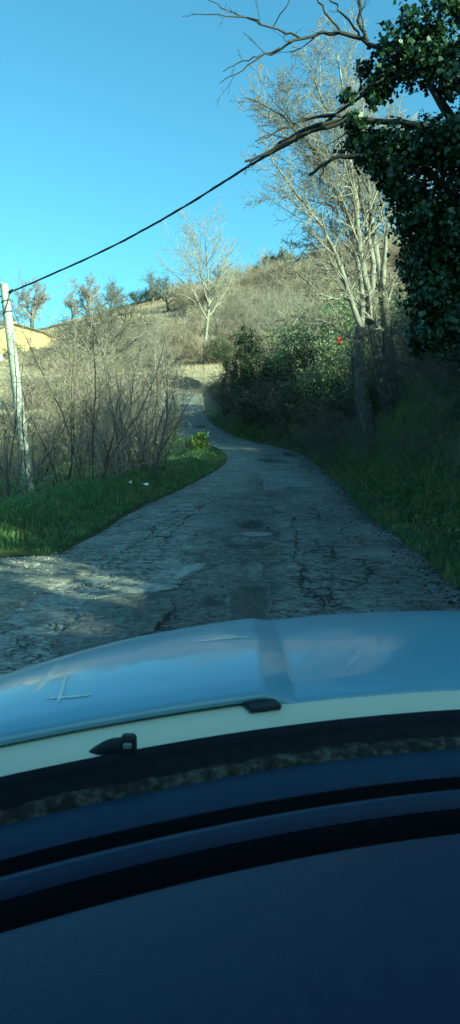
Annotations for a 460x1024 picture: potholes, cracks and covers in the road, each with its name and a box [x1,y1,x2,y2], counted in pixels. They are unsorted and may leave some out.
crack [241,479,378,609]
pothole [232,517,273,529]
crack [99,501,212,570]
crack [155,564,219,630]
